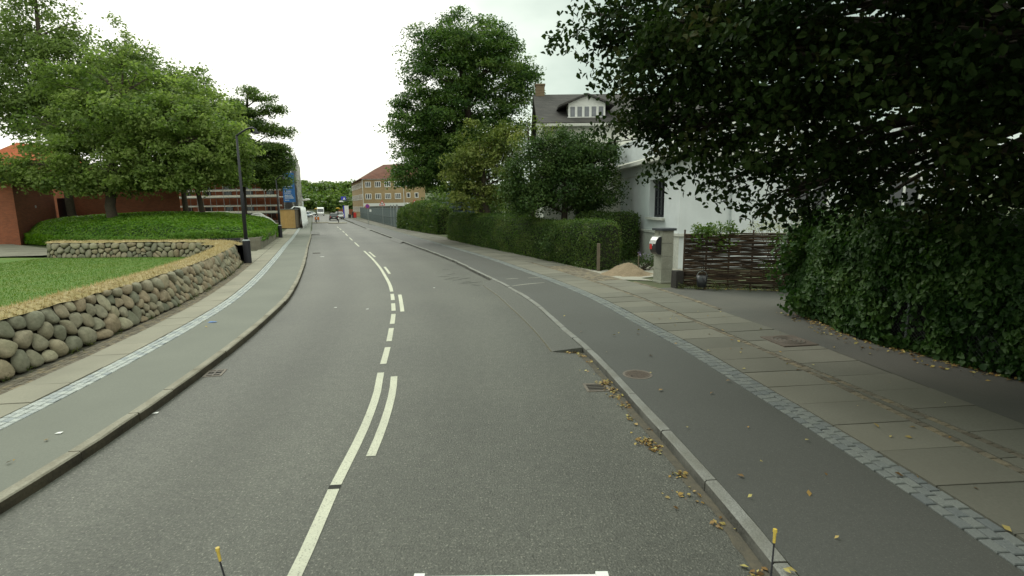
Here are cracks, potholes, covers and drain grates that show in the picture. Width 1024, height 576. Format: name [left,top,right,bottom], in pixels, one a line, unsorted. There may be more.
manhole cover [623,370,653,379]
manhole cover [760,335,819,347]
drain grate [583,383,611,392]
drain grate [203,369,227,377]
